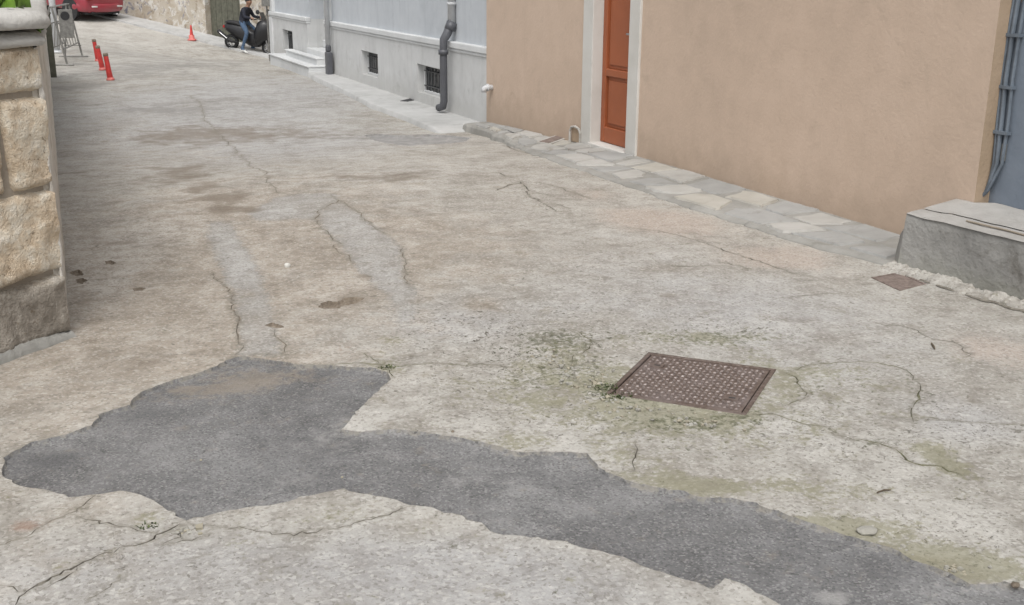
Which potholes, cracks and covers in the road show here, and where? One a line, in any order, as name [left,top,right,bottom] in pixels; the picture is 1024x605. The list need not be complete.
pothole [319,297,364,309]
crack [199,101,298,195]
manhole cover [607,352,776,415]
crack [497,173,585,211]
crack [749,361,1022,474]
crack [0,496,402,605]
manhole cover [871,273,926,291]
crack [315,197,408,284]
